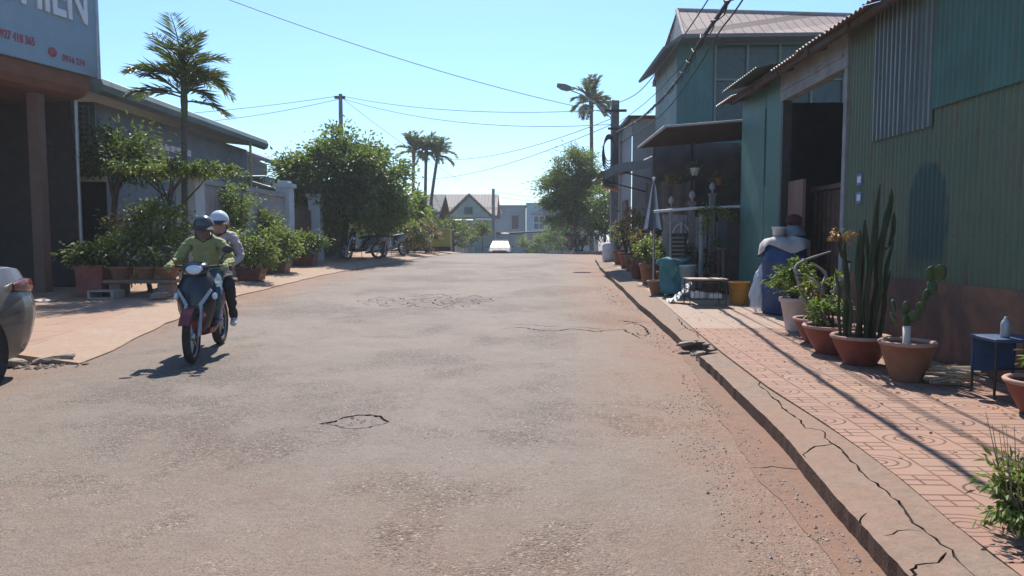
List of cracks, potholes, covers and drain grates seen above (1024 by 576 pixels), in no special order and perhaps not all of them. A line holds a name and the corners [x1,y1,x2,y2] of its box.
crack [358,294,491,309]
crack [502,321,649,339]
pothole [320,414,389,429]
